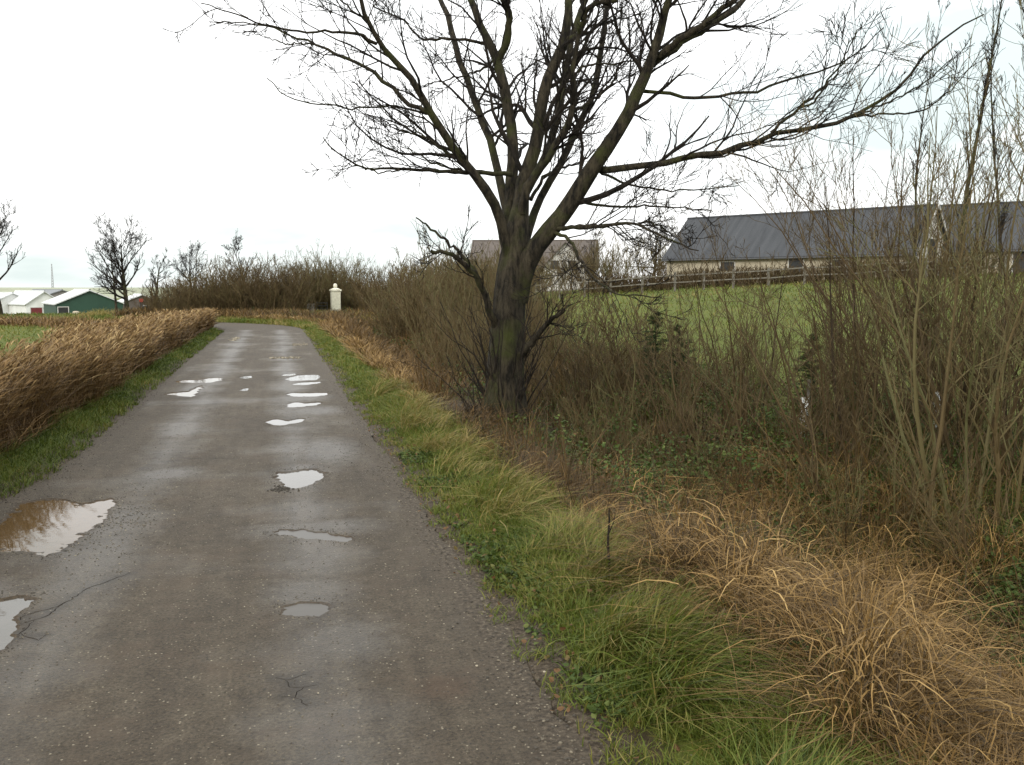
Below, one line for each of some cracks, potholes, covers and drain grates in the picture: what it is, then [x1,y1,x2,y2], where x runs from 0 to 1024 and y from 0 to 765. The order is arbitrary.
pothole [280,601,332,617]
crack [18,574,127,641]
pothole [273,529,354,543]
pothole [0,498,118,557]
pothole [271,468,330,488]
pothole [163,385,205,397]
pothole [0,595,40,651]
